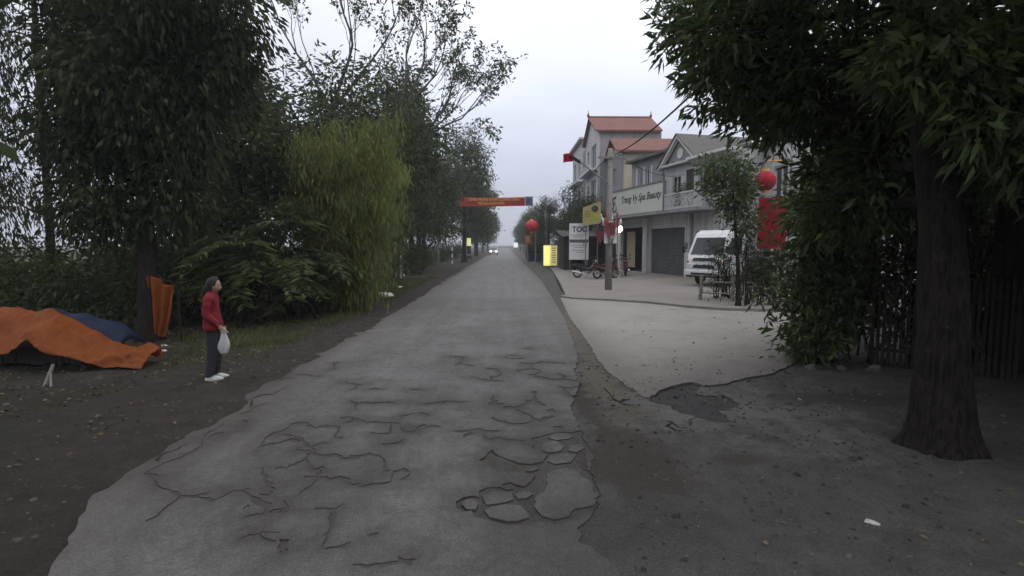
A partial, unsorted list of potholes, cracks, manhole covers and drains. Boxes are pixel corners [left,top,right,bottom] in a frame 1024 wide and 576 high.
pothole [649,384,740,423]
crack [144,348,581,569]
